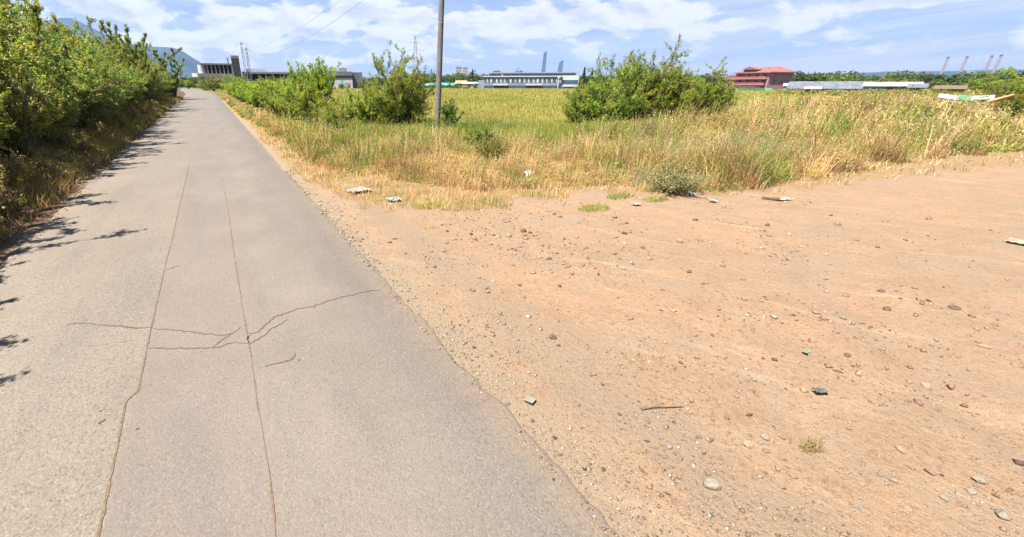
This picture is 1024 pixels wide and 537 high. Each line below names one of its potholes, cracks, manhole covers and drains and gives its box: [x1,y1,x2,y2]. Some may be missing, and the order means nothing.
crack [66,165,380,537]
